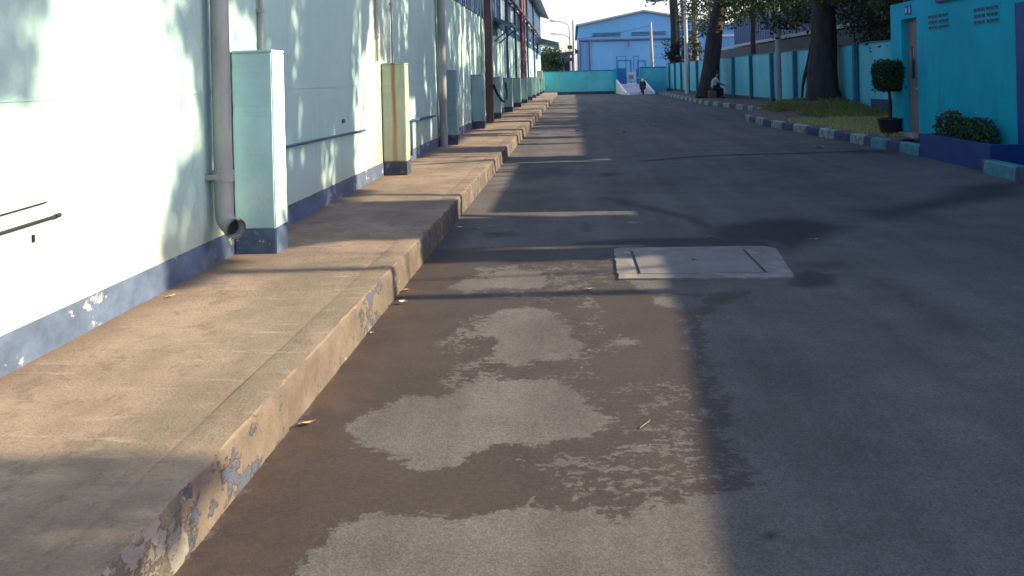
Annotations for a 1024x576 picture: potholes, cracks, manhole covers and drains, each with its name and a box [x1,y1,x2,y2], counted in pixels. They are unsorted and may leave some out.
manhole cover [614,246,794,280]
